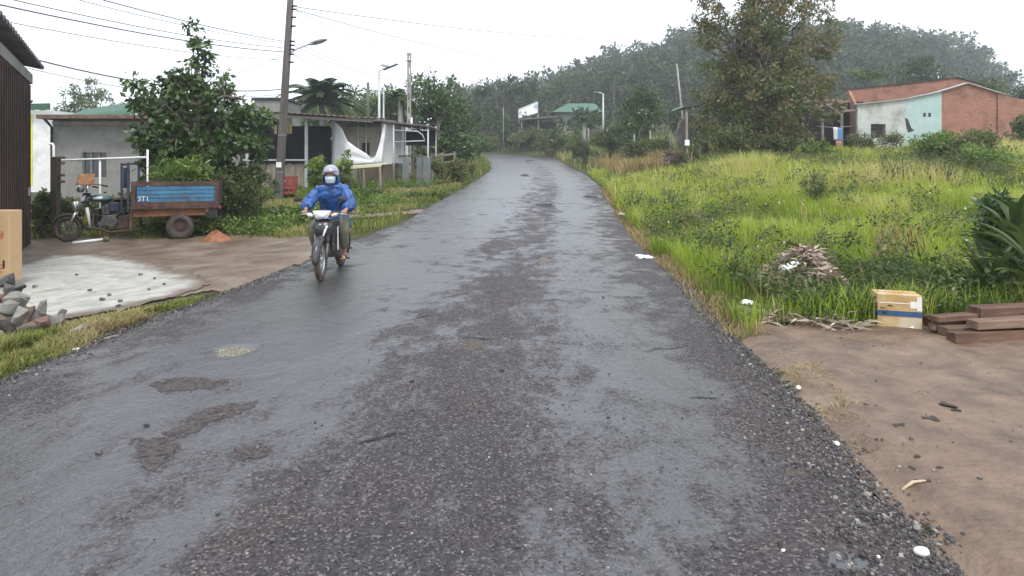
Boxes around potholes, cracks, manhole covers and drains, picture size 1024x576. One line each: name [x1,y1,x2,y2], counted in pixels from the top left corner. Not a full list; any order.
pothole [215,347,255,357]
